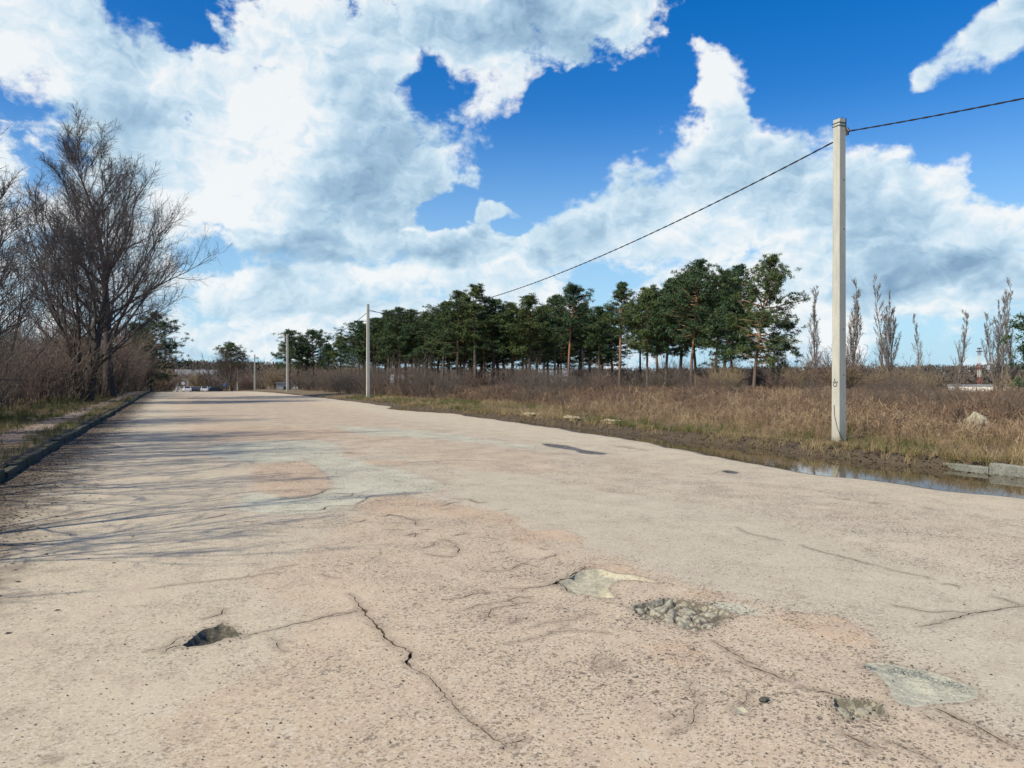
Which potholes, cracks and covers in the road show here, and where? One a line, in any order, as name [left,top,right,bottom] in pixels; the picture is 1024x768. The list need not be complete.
crack [893,605,1024,627]
crack [294,488,602,642]
pothole [634,598,731,631]
crack [246,593,524,748]
pothole [183,623,240,647]
pothole [834,696,885,720]
